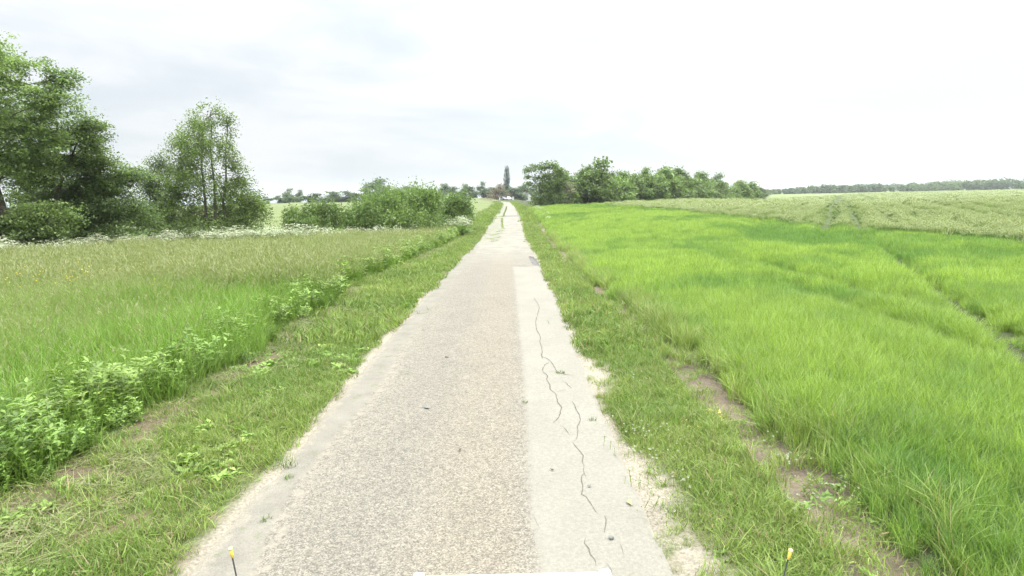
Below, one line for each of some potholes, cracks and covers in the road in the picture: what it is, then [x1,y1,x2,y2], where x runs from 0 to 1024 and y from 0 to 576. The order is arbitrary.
crack [532,298,624,567]
crack [485,206,527,242]
